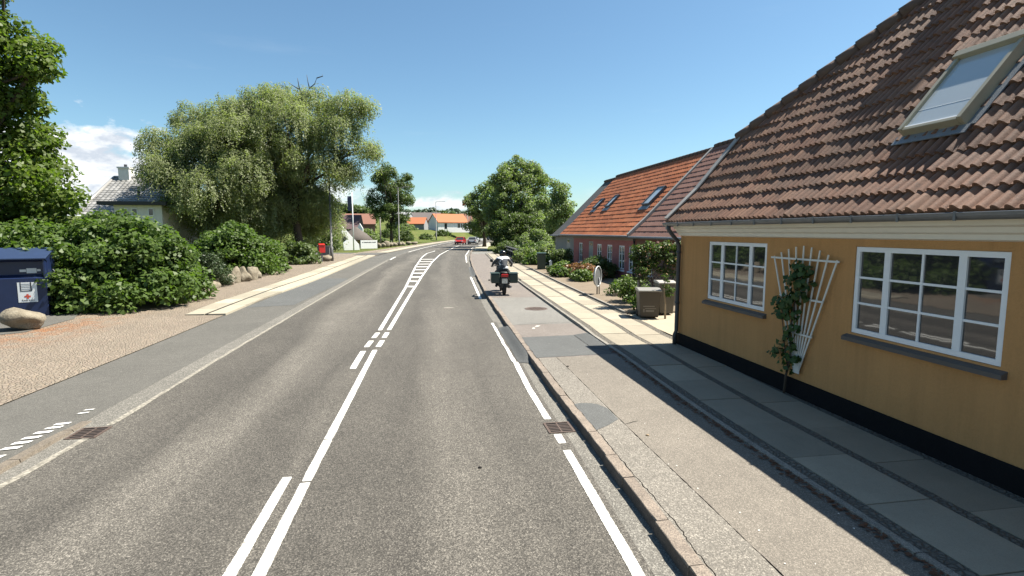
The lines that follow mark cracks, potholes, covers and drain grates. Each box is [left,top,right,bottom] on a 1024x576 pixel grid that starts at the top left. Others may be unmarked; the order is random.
drain grate [543,421,576,434]
drain grate [63,426,112,440]
